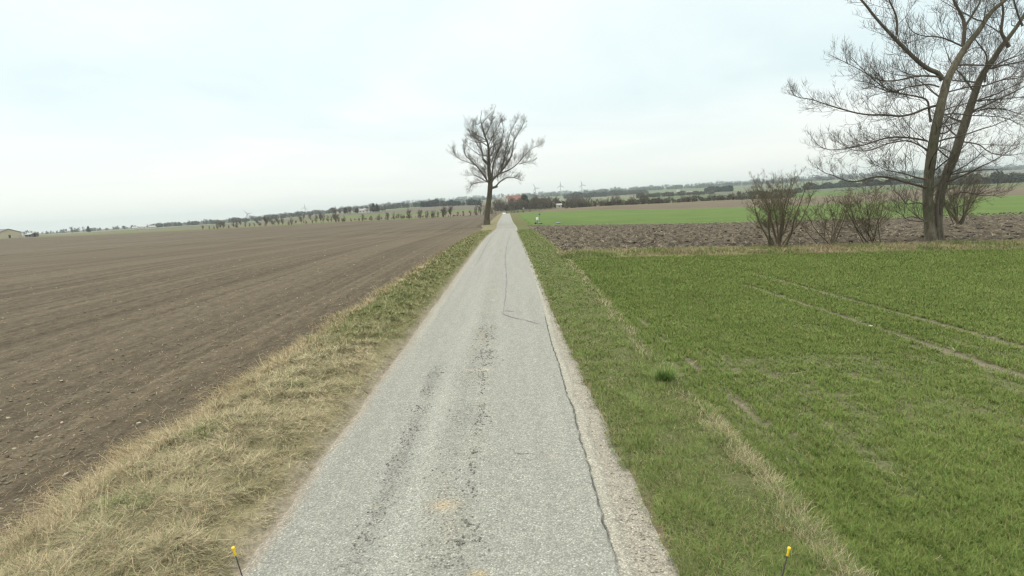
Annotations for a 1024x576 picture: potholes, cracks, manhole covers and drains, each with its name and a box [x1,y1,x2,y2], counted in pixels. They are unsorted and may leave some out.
crack [545,318,620,575]
crack [424,325,500,568]
